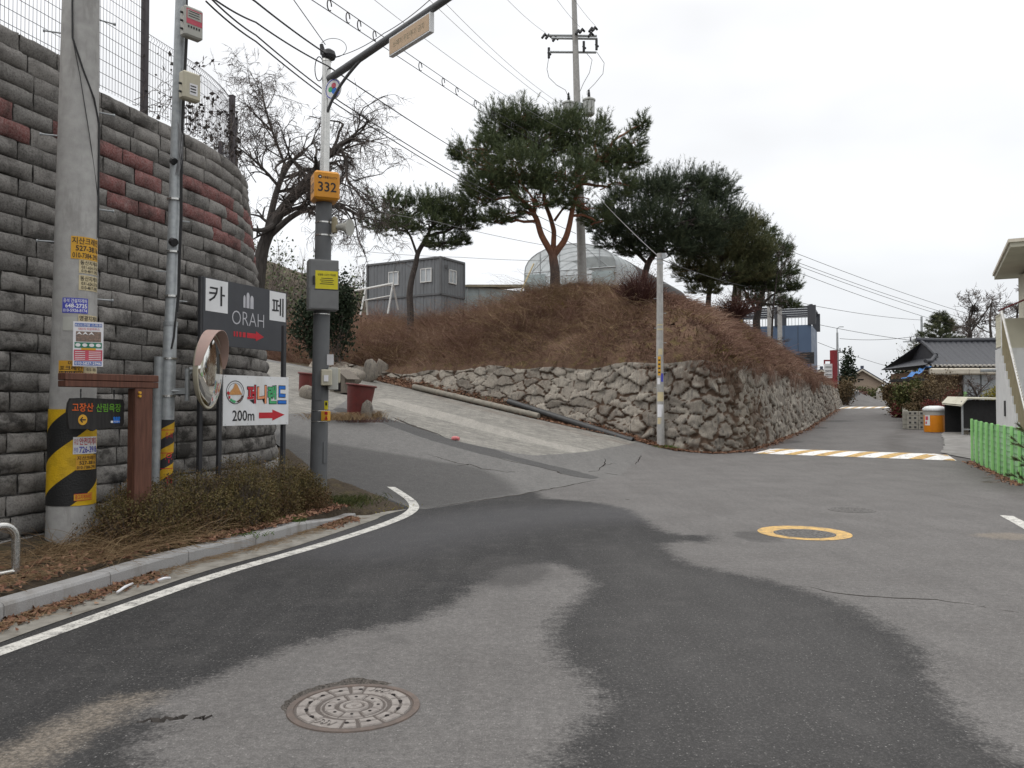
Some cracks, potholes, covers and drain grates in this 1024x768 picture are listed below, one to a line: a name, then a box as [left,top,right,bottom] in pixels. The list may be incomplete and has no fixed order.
manhole cover [286,684,420,733]
crack [812,587,1019,613]
crack [137,714,213,723]
crack [431,455,616,478]
